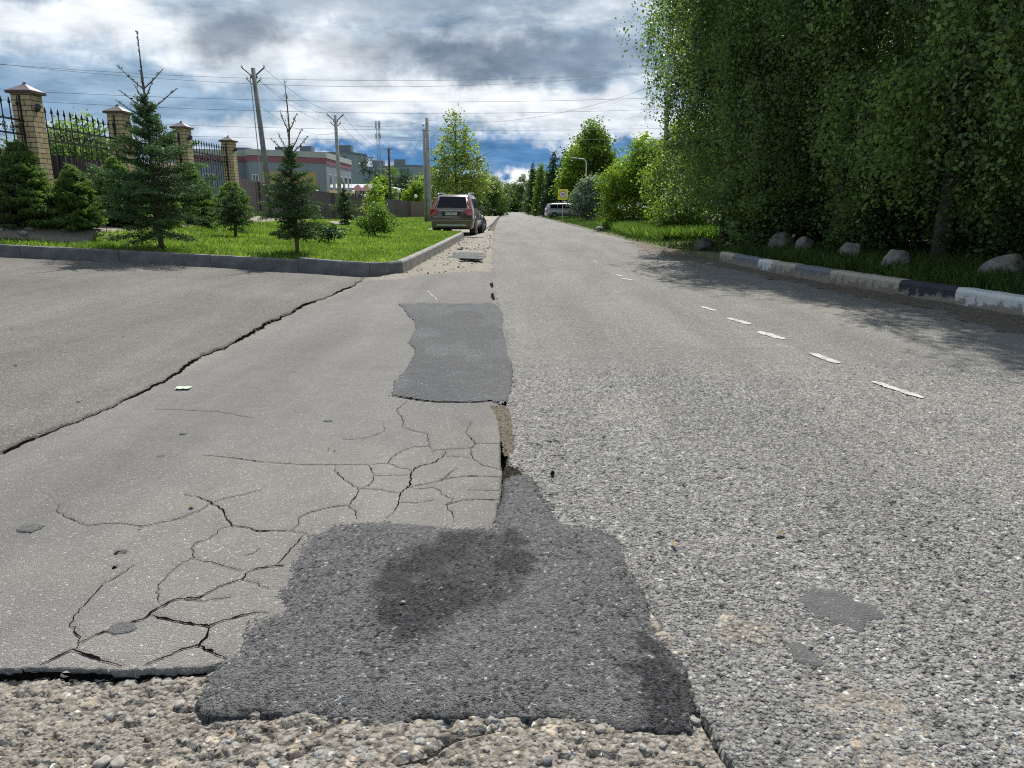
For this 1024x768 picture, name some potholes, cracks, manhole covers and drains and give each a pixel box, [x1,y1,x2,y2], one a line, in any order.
crack [3,280,363,454]
crack [0,395,515,685]
